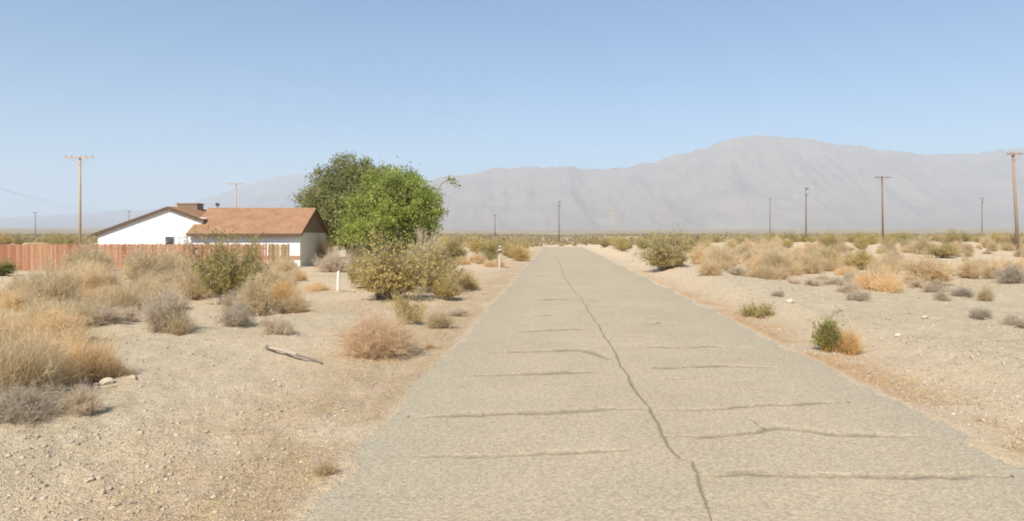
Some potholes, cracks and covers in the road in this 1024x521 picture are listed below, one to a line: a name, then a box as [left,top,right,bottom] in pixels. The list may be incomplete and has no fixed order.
crack [408,257,1012,521]
